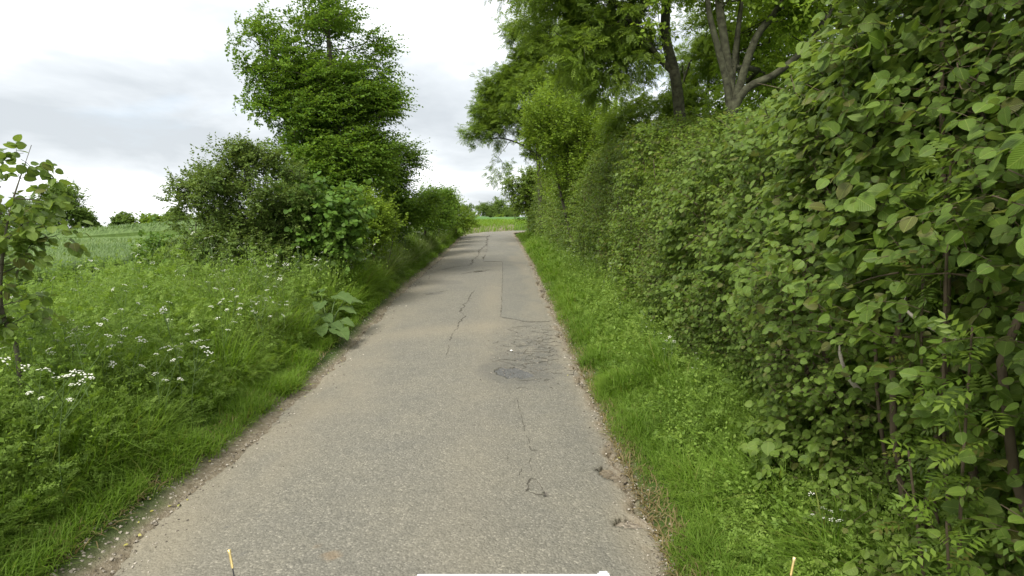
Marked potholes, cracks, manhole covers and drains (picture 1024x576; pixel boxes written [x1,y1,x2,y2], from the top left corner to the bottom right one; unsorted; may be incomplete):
crack [507,398,543,495]
